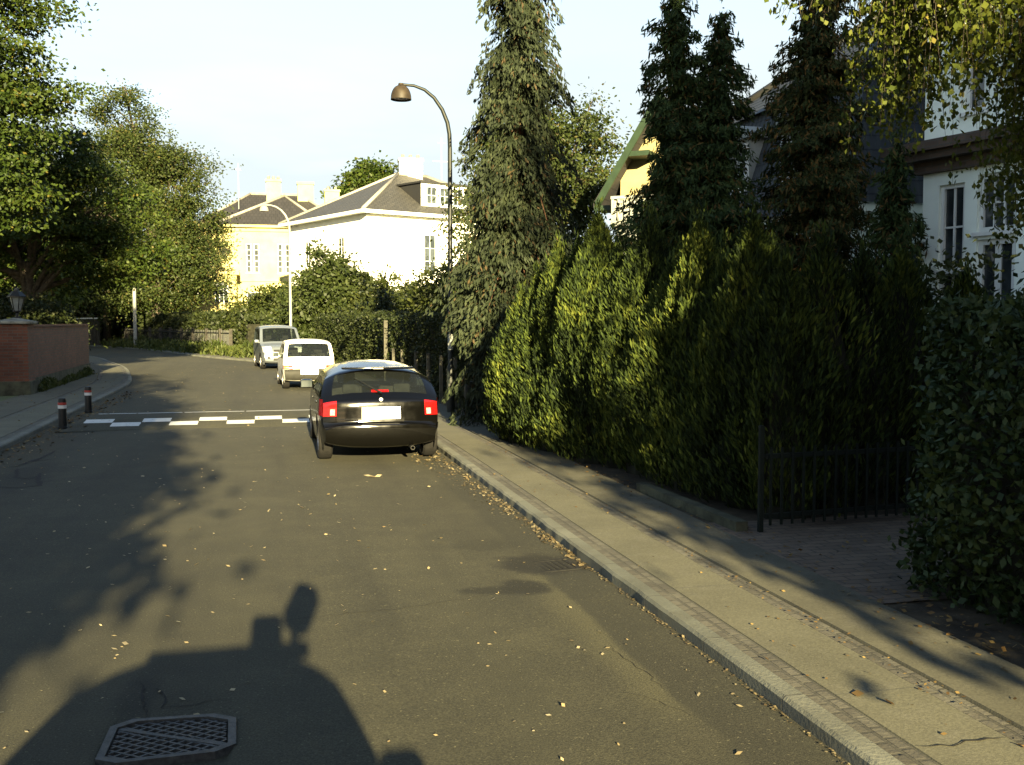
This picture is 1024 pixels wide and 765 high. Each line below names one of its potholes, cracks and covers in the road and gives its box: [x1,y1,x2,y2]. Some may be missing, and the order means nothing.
drain grate [533,558,582,572]
crack [929,737,1004,747]
crack [140,682,227,715]
